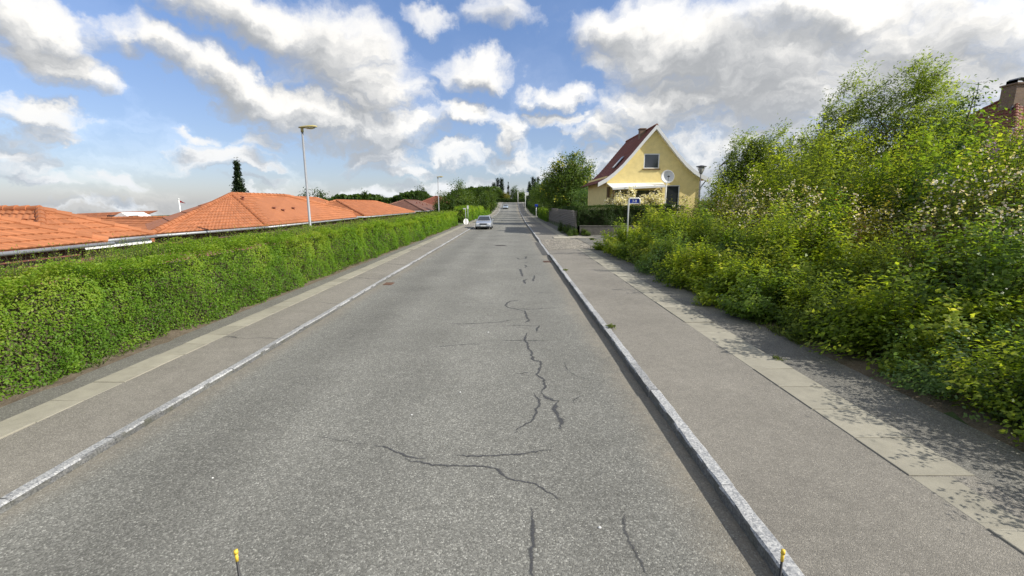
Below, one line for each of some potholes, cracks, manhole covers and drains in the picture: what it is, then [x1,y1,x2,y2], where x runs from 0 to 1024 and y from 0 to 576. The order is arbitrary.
crack [335,439,558,576]
crack [623,517,647,574]
crack [468,257,580,429]
